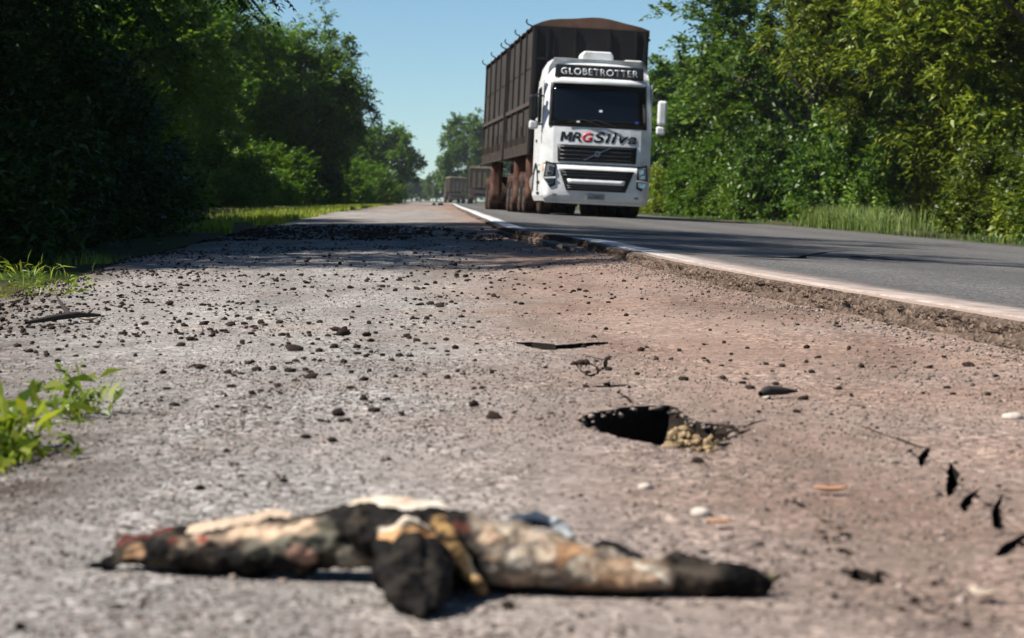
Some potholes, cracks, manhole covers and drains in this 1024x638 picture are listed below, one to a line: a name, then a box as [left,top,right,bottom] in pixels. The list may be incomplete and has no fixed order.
crack [514,342,629,387]
crack [857,425,1024,557]
pothole [576,389,764,454]
